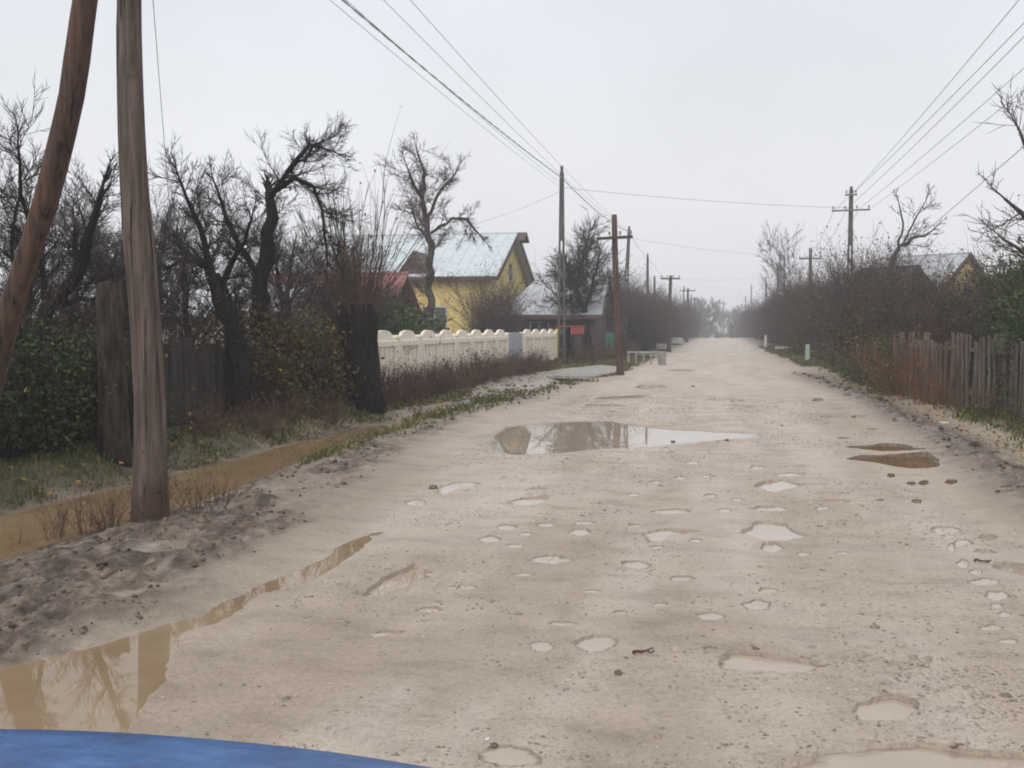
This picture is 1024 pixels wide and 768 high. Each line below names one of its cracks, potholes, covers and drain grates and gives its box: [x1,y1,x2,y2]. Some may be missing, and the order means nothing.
pothole [851,693,920,721]
pothole [740,520,812,541]
pothole [476,744,544,767]
pothole [620,560,653,569]
pothole [641,528,700,542]
pothole [526,554,576,564]
pothole [436,481,480,495]
pothole [695,612,727,620]
pothole [845,443,925,451]
pothole [983,590,1013,601]
pothole [506,495,550,505]
pothole [741,598,771,610]
